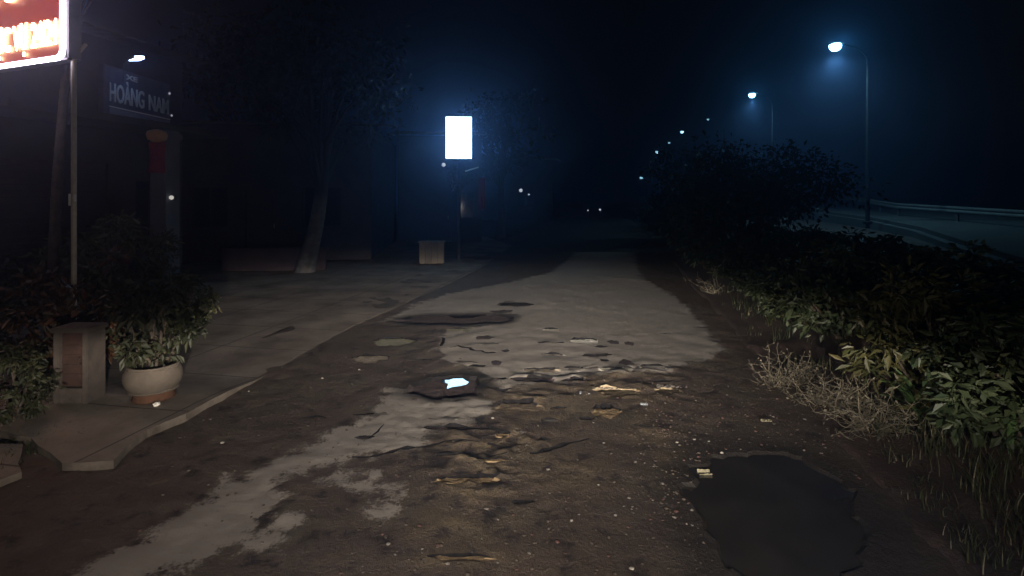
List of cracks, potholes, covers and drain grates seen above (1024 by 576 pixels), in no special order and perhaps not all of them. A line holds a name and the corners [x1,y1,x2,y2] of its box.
crack [530,438,590,454]
pothole [406,375,480,400]
pothole [394,314,514,325]
pothole [677,450,871,576]
crack [352,413,507,458]
crack [404,337,514,392]
